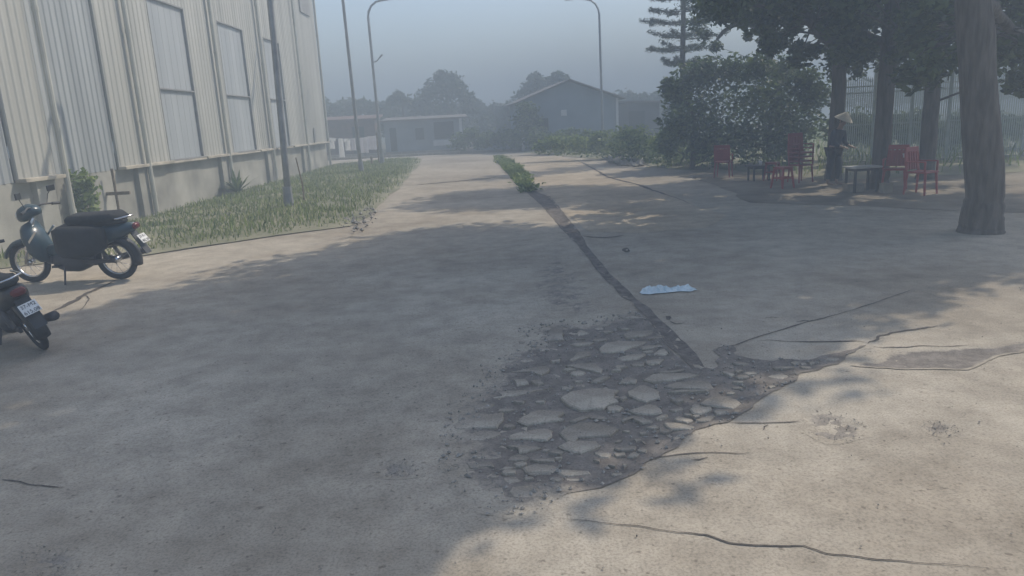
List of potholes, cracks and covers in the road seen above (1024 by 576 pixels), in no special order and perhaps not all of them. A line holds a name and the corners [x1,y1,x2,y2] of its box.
crack [702,290,962,351]
crack [53,280,115,311]
pothole [436,311,865,520]
crack [2,479,57,487]
crack [553,517,999,569]
pothole [916,420,965,438]
